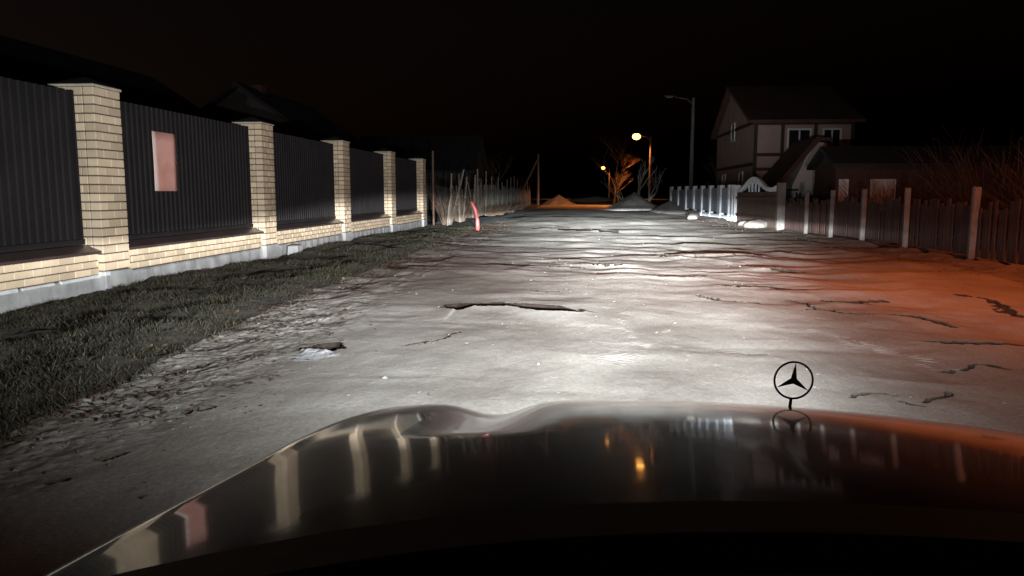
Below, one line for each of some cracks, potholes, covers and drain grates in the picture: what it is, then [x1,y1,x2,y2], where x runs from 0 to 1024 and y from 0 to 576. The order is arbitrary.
pothole [287,342,347,361]
crack [848,391,954,407]
crack [785,300,890,315]
crack [402,331,462,346]
crack [953,294,1024,318]
crack [940,364,1013,374]
